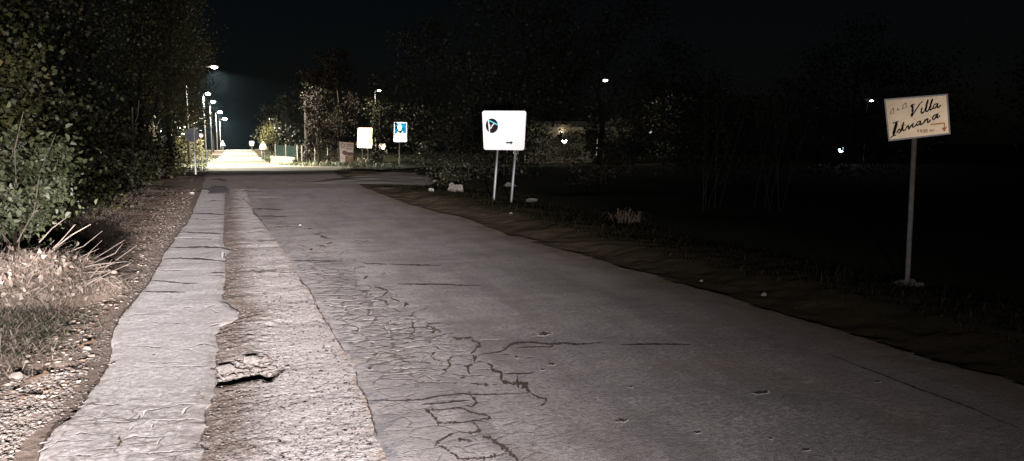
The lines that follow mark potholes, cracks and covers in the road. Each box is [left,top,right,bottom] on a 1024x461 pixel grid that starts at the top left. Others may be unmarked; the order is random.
crack [129,179,603,461]
pothole [216,351,284,388]
